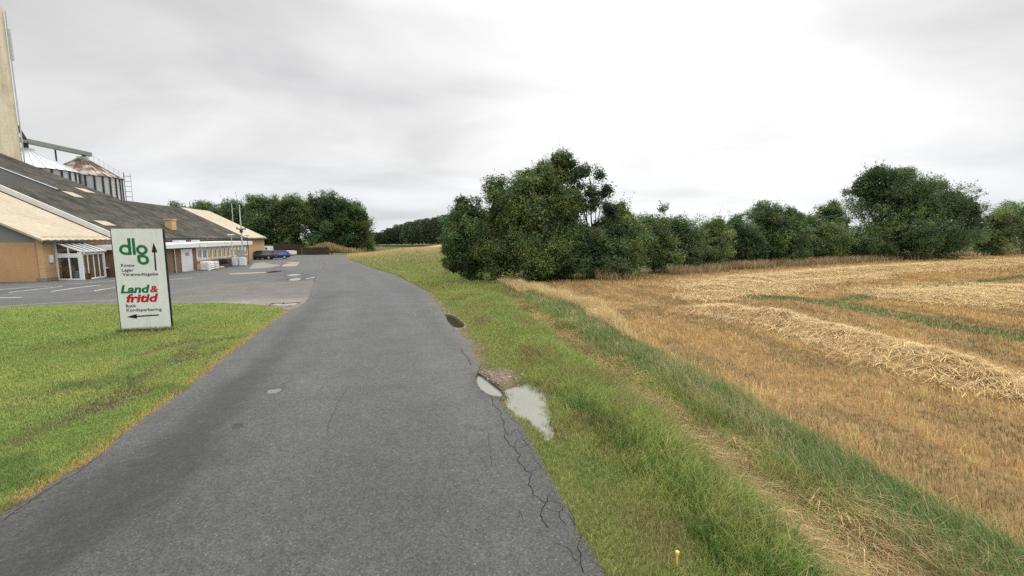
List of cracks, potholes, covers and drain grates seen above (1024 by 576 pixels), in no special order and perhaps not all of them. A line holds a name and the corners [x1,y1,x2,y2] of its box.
pothole [476,372,507,400]
crack [468,396,584,573]
pothole [444,312,467,331]
